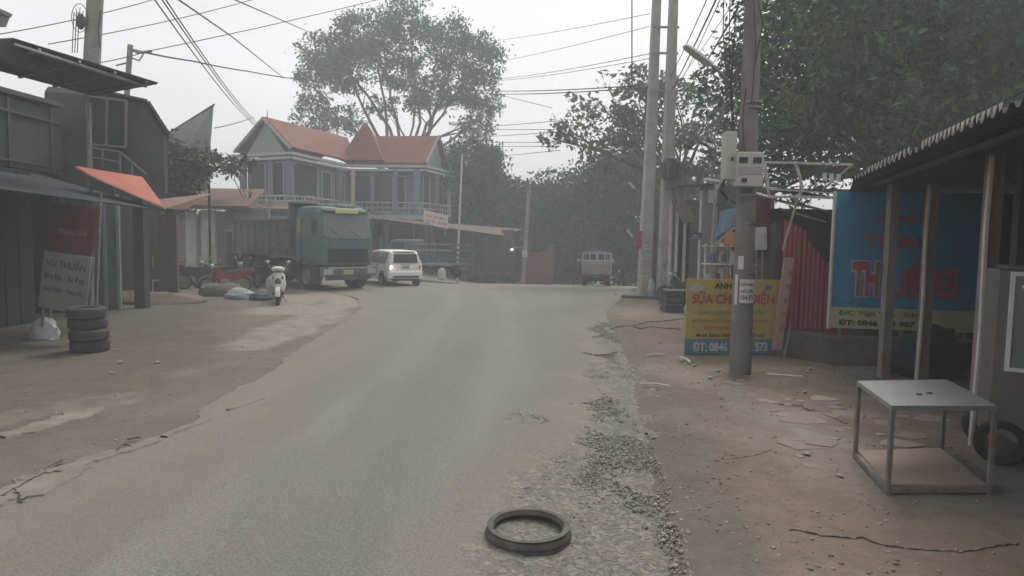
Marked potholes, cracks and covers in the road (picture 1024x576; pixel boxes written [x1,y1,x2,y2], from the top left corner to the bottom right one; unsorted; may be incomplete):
pothole [503,408,552,430]
crack [779,404,848,424]
crack [2,460,63,501]
crack [789,529,1019,555]
pothole [585,361,681,440]
crack [609,318,684,330]
